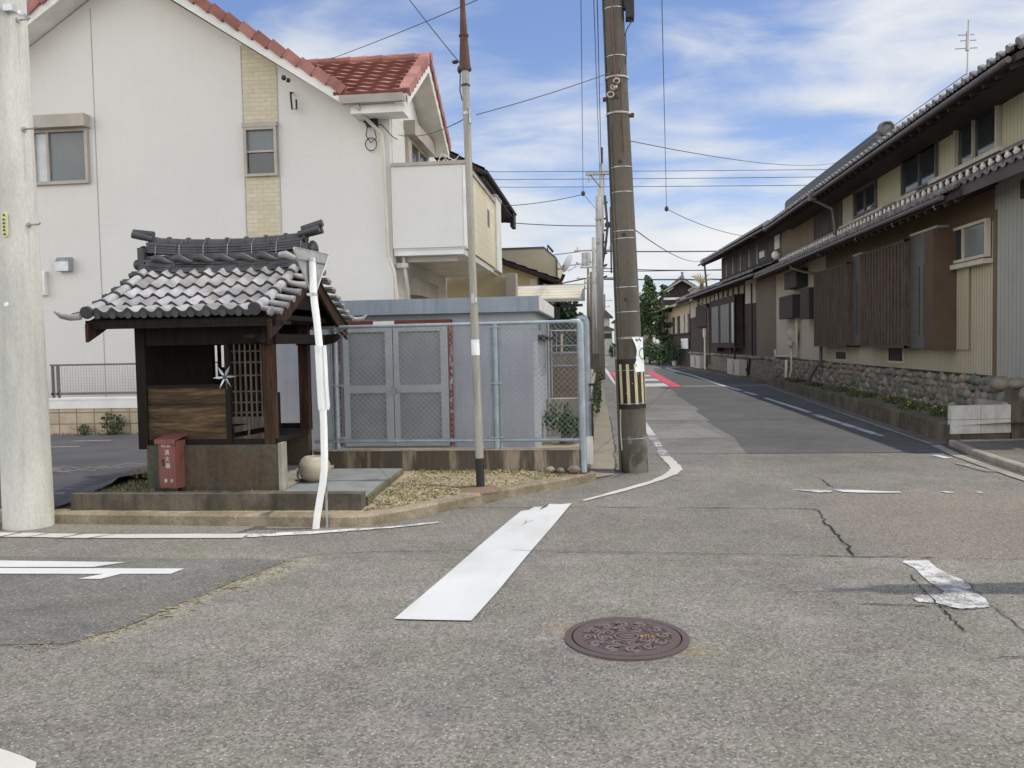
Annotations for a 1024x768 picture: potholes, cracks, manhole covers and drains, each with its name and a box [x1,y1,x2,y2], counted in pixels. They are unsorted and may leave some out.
manhole cover [564,617,690,662]
crack [864,574,1024,631]
crack [804,508,854,555]
